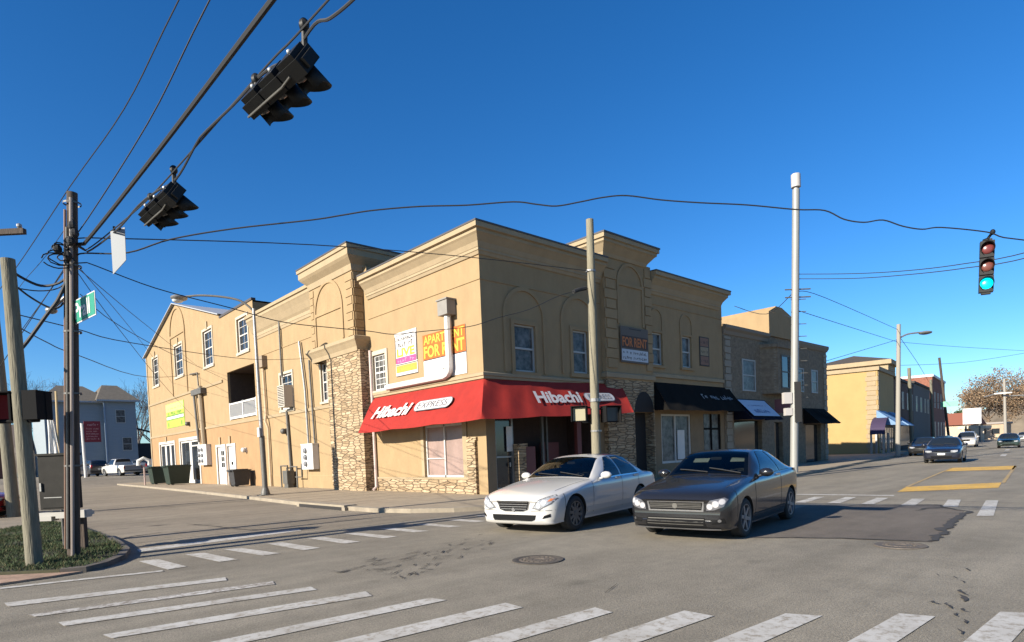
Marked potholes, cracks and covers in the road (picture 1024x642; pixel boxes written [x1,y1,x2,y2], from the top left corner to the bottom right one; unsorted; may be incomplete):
manhole cover [873,541,929,549]
manhole cover [512,555,564,565]
